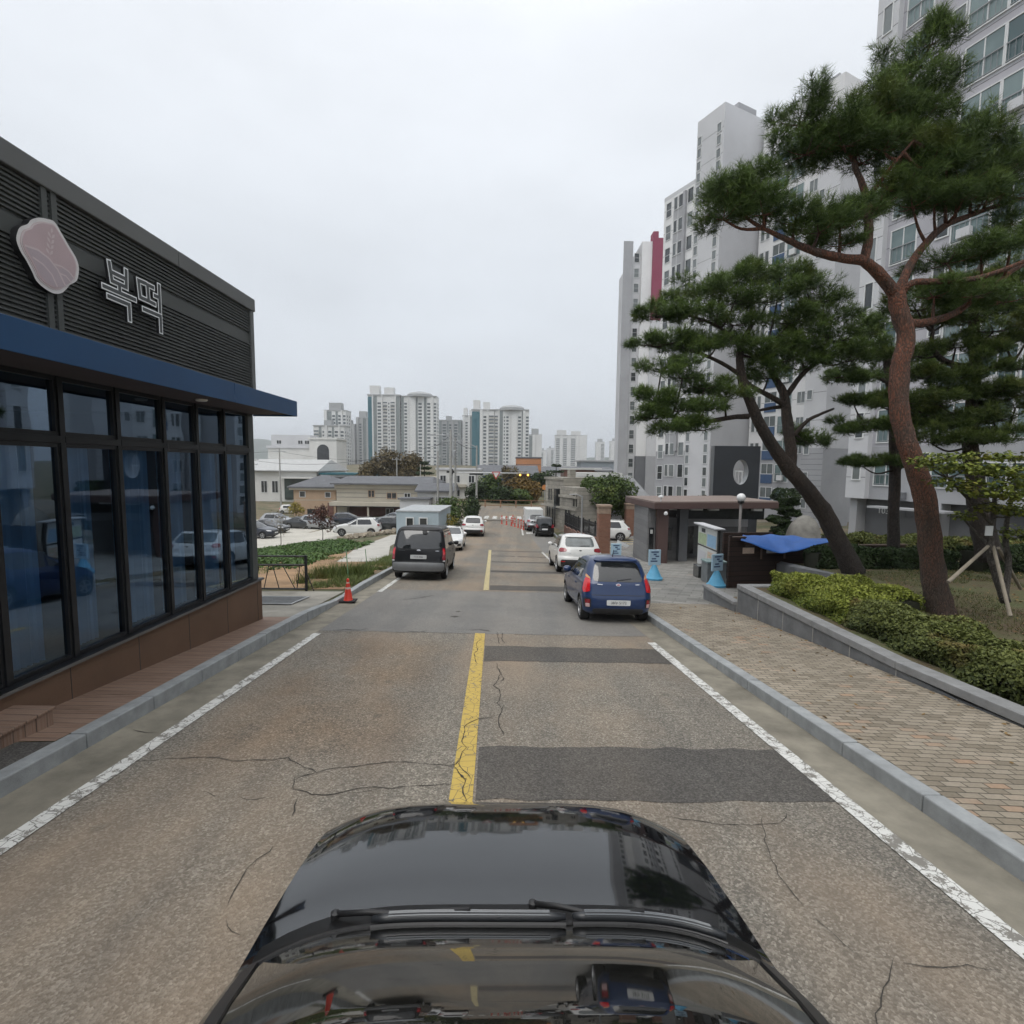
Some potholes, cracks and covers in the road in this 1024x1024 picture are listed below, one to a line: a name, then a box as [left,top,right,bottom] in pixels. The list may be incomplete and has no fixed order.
crack [675,813,857,954]
crack [875,961,995,1024]
crack [144,640,504,815]
crack [226,848,272,935]
drain grate [262,596,310,605]
